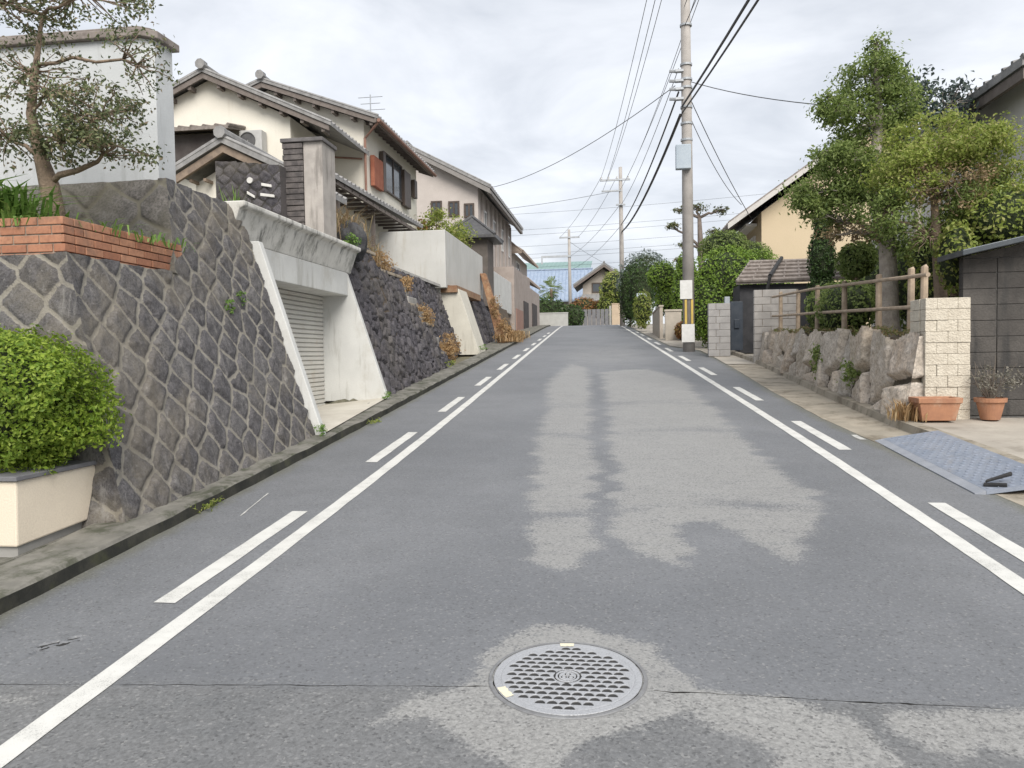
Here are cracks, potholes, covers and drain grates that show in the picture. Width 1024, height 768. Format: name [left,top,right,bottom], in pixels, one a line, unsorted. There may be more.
manhole cover [488,642,648,720]
